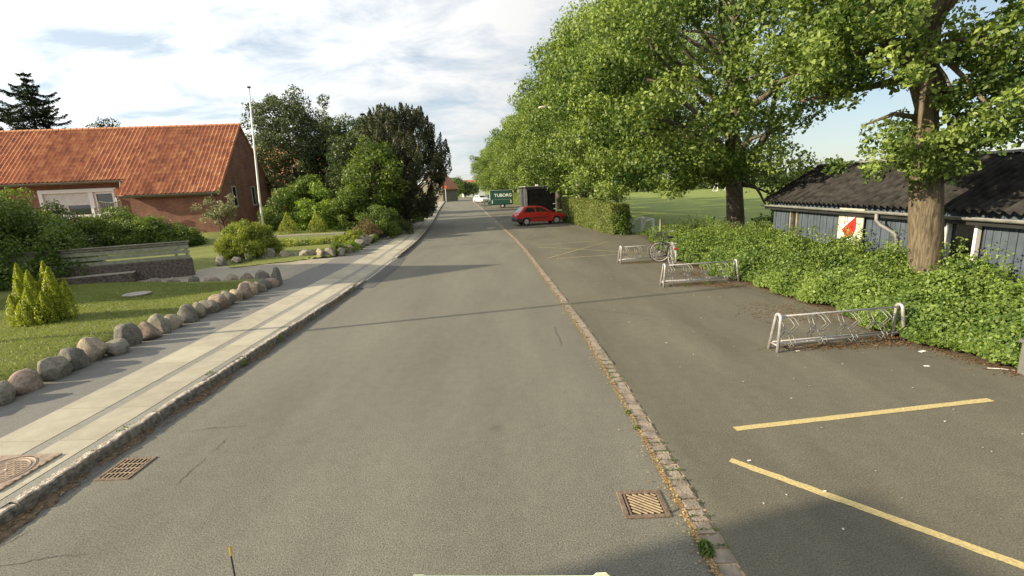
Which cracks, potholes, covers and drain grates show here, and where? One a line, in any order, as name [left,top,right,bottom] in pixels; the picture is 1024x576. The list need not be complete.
manhole cover [0,453,62,492]
drain grate [616,489,672,519]
crack [0,554,81,566]
drain grate [93,456,158,481]
